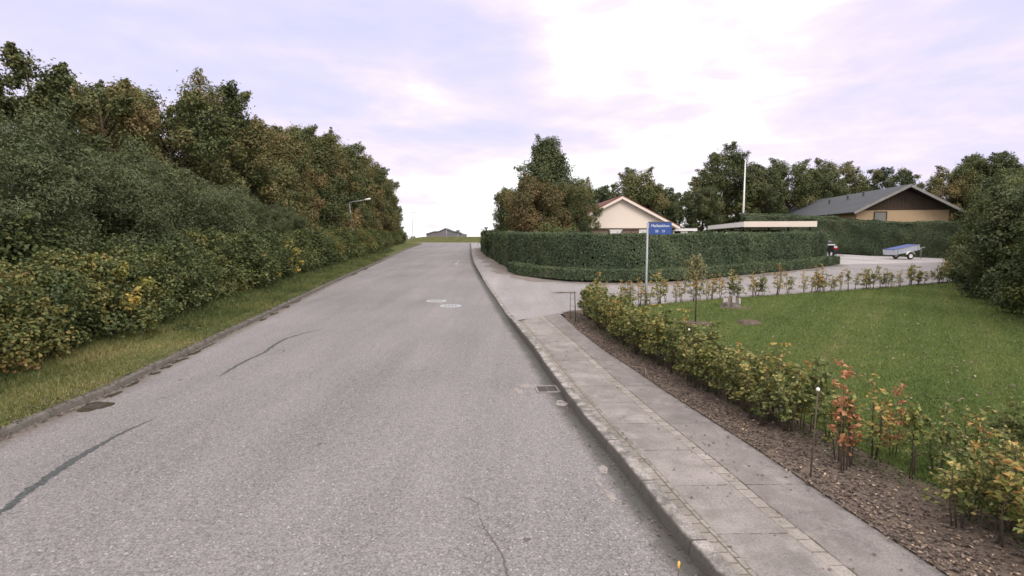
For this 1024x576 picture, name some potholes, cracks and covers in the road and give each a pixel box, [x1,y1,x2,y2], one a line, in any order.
drain grate [534,385,561,393]
crack [464,497,509,576]
